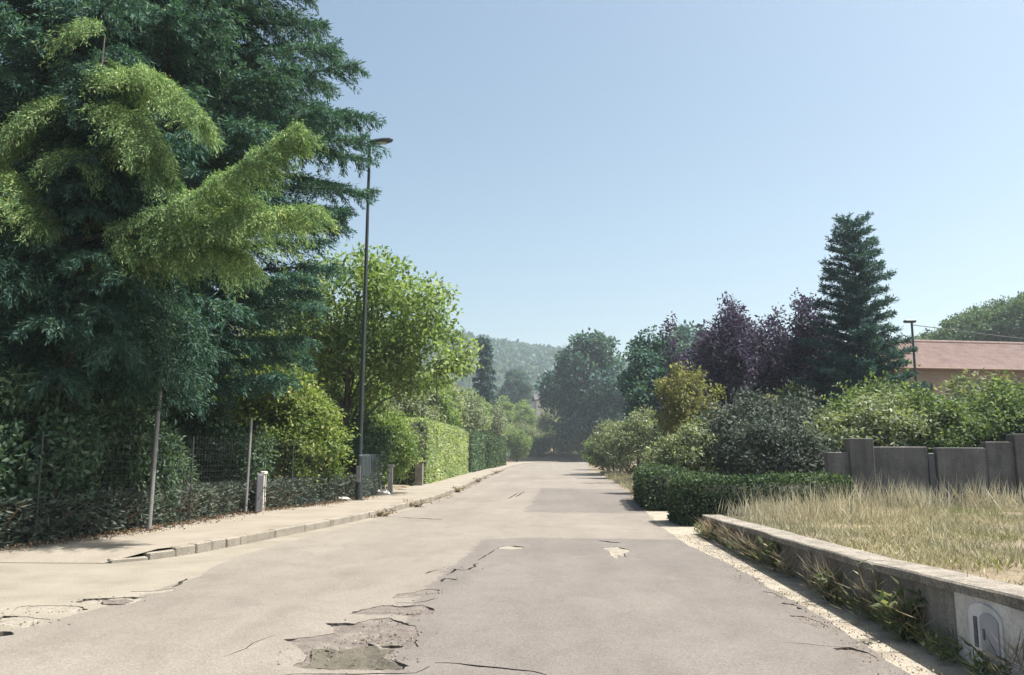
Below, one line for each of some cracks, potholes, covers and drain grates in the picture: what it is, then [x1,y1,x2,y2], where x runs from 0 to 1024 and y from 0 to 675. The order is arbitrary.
pothole [13,605,88,614]
pothole [602,547,630,559]
crack [287,662,547,675]
pothole [0,616,51,628]
pothole [76,597,145,605]
pothole [283,618,419,670]
